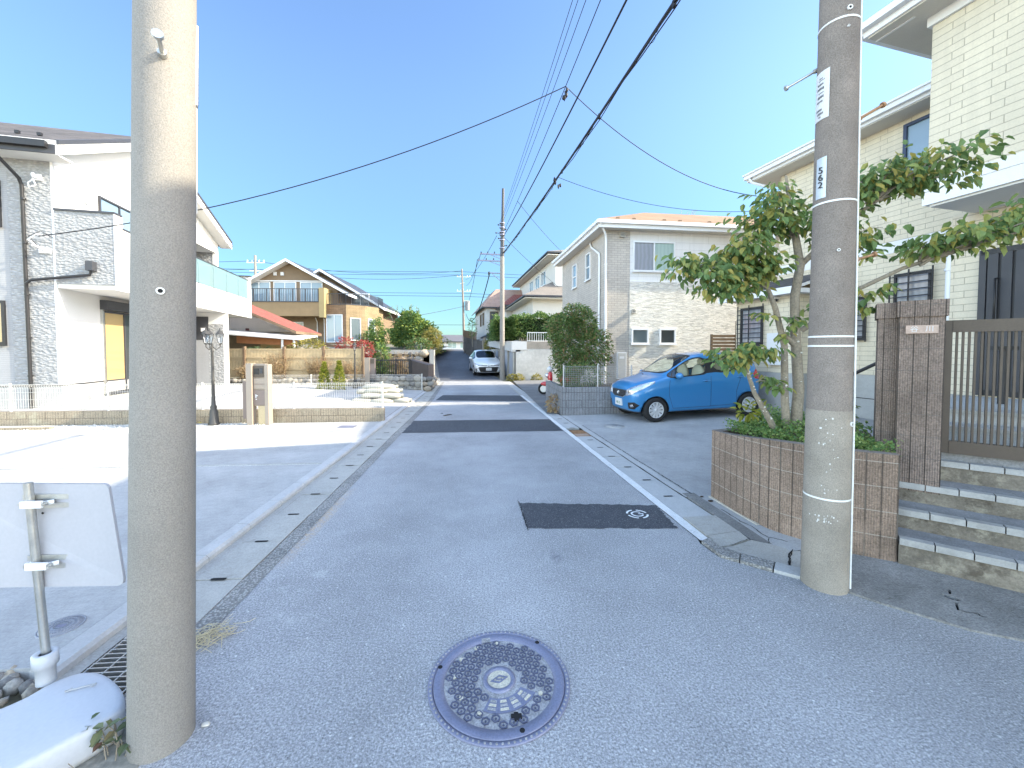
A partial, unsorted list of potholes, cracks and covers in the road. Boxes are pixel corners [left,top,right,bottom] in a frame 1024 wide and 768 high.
manhole cover [427,631,570,749]
drain grate [83,637,127,695]
manhole cover [34,615,87,639]
crack [721,509,793,564]
